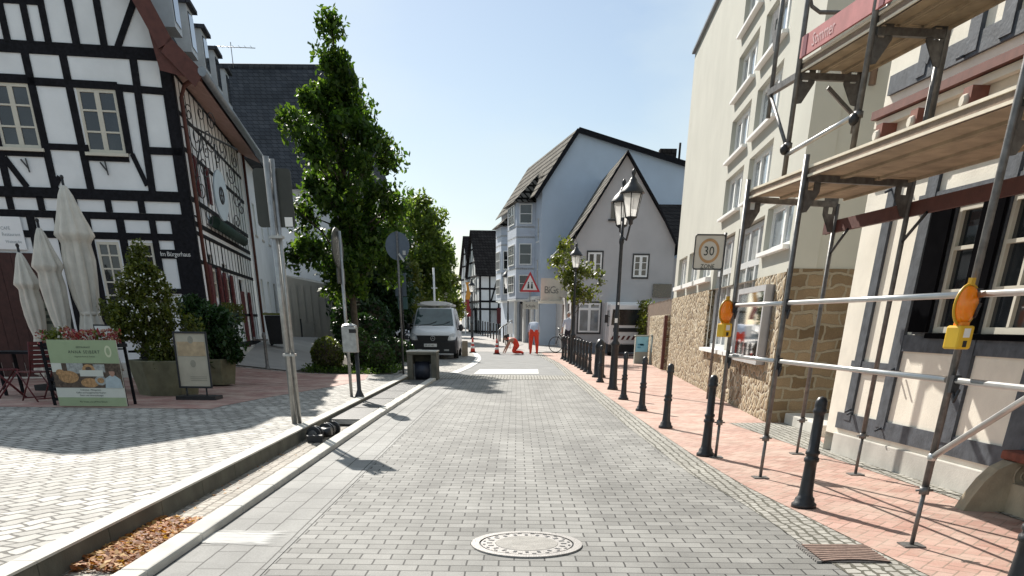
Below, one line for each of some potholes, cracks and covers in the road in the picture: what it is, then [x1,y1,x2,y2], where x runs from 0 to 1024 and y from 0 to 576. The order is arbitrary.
manhole cover [471,531,582,559]
drain grate [796,544,892,563]
